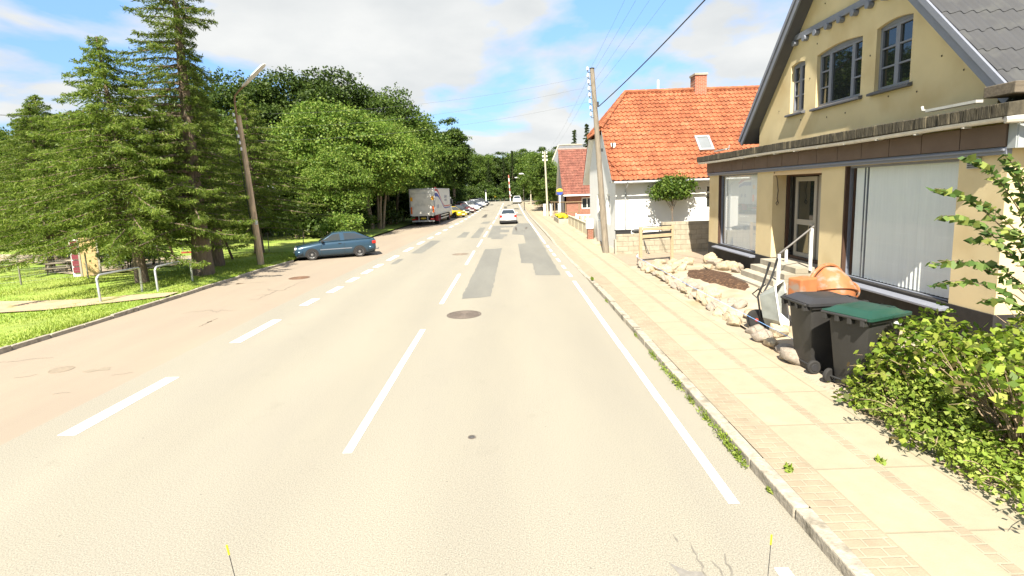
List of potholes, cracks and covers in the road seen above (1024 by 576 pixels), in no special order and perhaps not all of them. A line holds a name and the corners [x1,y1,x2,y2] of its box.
manhole cover [447,310,481,319]
crack [673,535,733,576]
